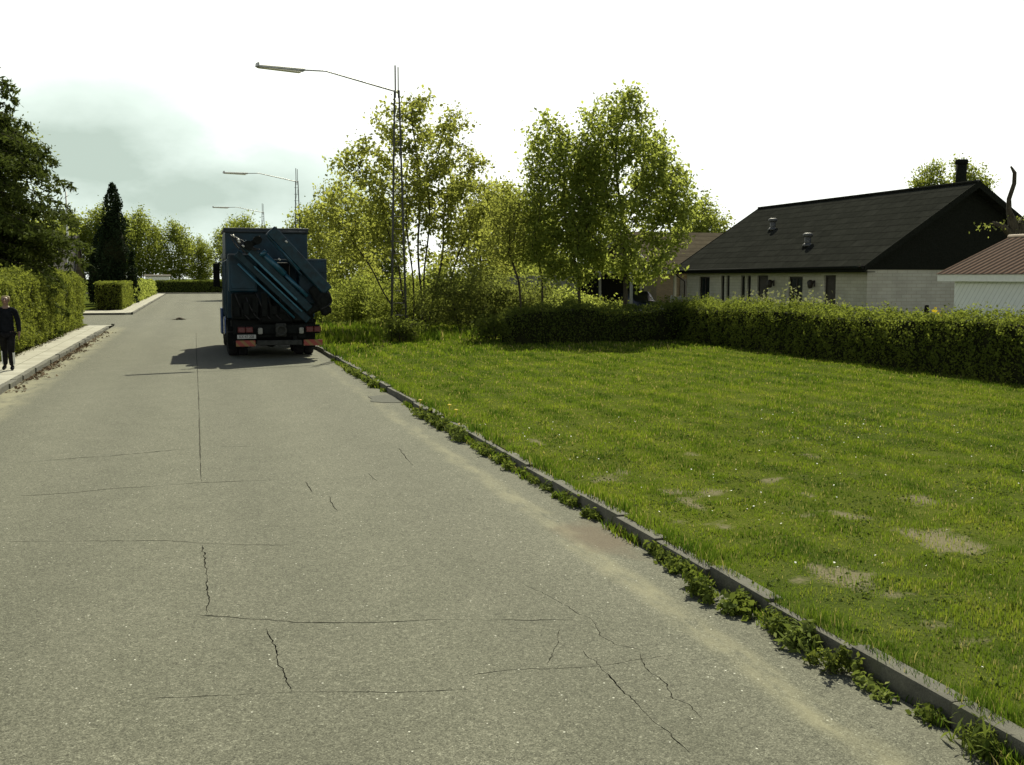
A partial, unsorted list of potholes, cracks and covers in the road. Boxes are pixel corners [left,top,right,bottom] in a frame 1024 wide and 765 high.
crack [14,540,703,753]
